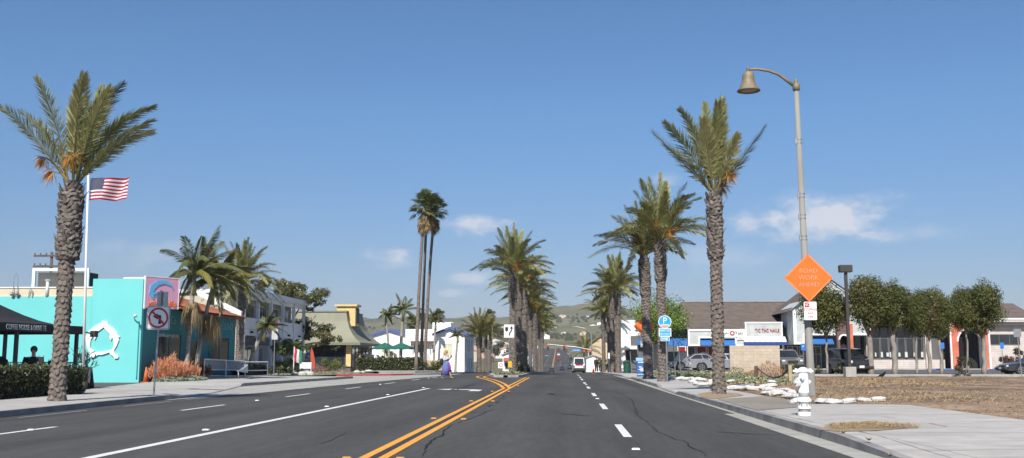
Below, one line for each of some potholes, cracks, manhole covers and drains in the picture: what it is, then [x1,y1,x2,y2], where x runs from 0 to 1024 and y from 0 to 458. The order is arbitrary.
crack [612,390,706,456]
crack [422,410,490,456]
